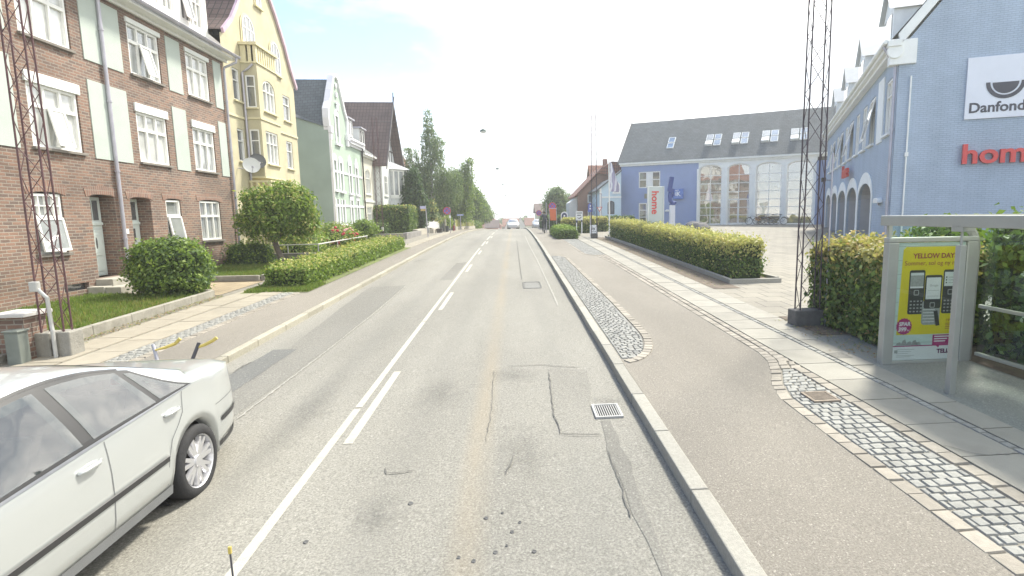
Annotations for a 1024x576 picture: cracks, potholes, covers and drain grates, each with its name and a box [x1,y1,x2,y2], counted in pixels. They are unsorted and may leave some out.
crack [486,364,631,517]
drain grate [591,403,624,419]
